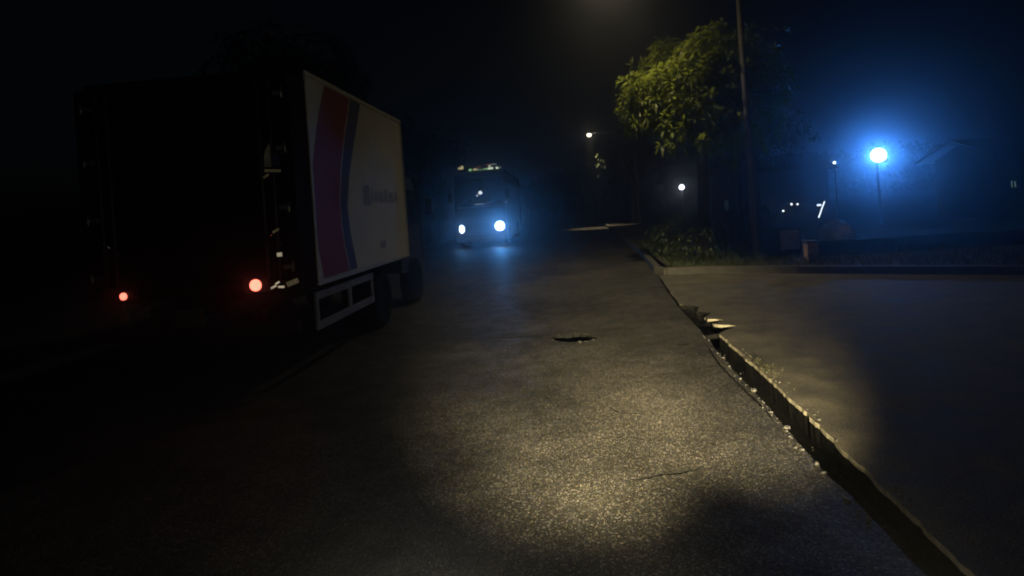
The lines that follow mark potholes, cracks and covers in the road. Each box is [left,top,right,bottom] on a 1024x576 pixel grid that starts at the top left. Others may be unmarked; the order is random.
pothole [550,332,597,342]
crack [622,468,699,481]
